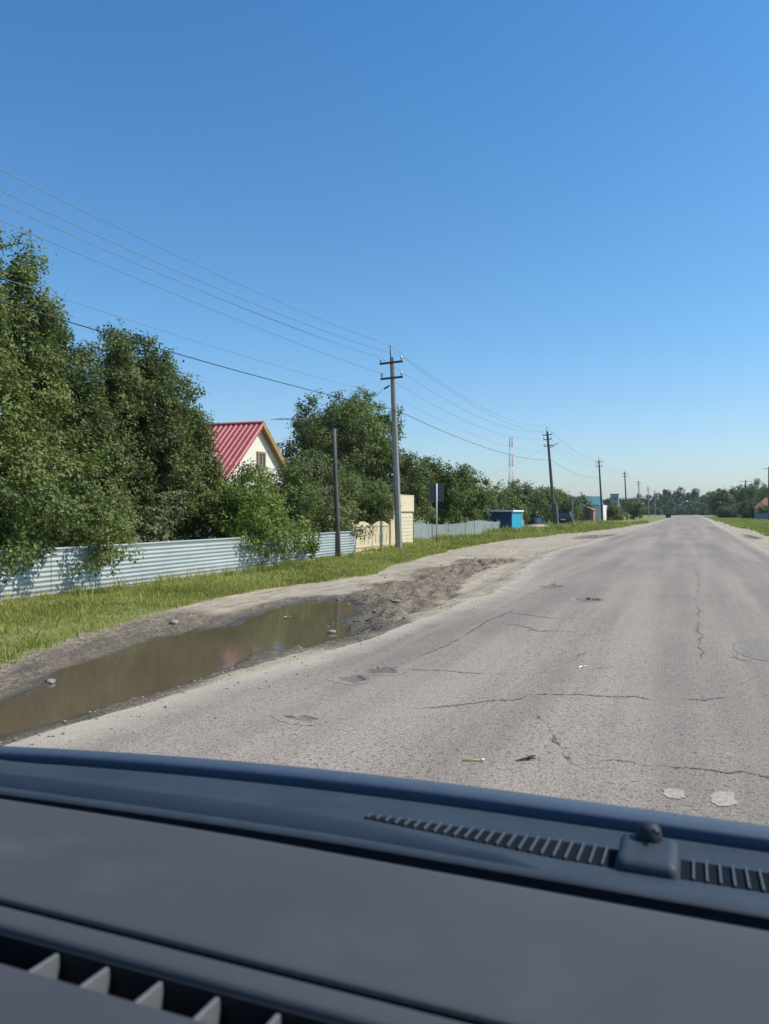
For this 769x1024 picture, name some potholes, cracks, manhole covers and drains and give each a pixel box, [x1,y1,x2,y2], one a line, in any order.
crack [598,759,769,778]
pothole [270,712,333,726]
crack [418,693,742,765]
pothole [355,665,408,676]
crack [414,611,643,674]
pothole [327,673,377,685]
